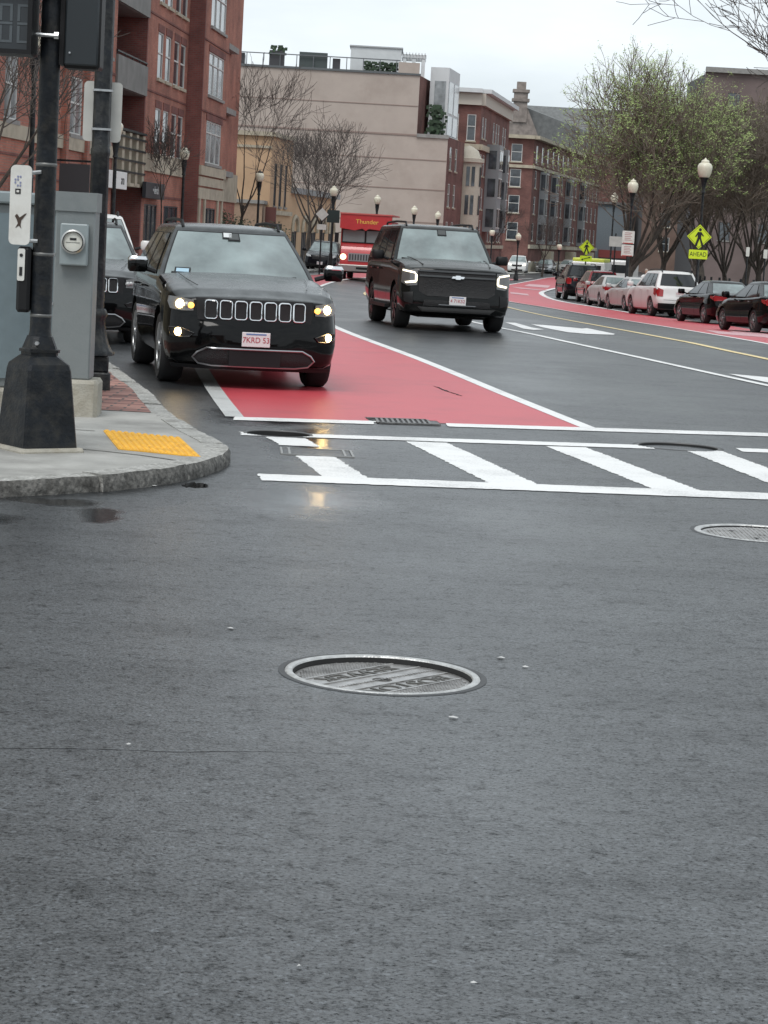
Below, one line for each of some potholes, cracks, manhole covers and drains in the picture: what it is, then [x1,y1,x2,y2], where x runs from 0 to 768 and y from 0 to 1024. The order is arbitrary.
manhole cover [632,442,724,451]
manhole cover [278,653,487,696]
drain grate [366,417,441,426]
manhole cover [240,430,313,438]
manhole cover [690,523,768,543]
utility cover [280,447,355,458]
